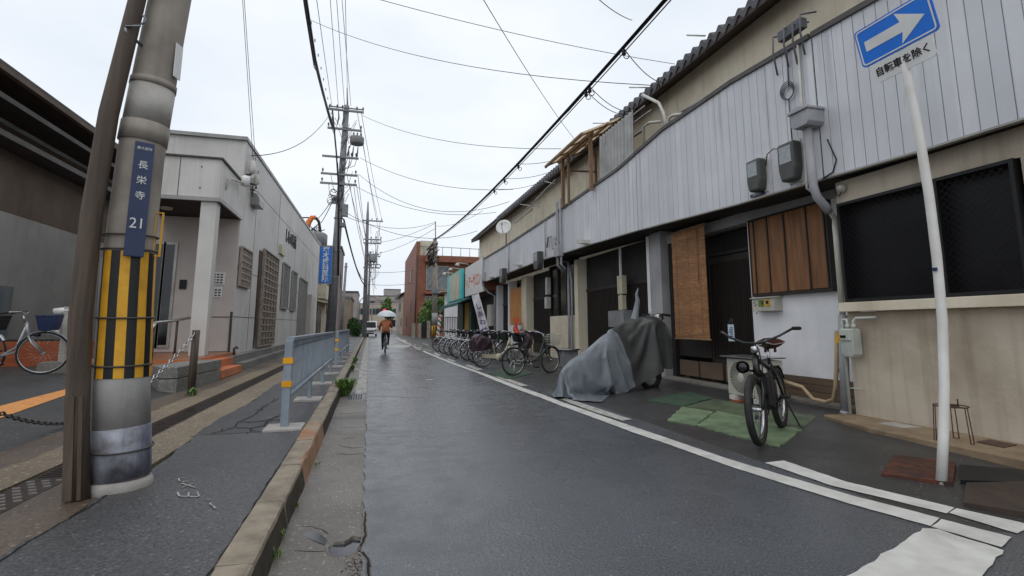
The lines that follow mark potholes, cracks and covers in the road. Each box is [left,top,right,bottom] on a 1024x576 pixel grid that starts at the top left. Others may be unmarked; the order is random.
crack [202,398,372,576]
pothole [324,535,362,560]
